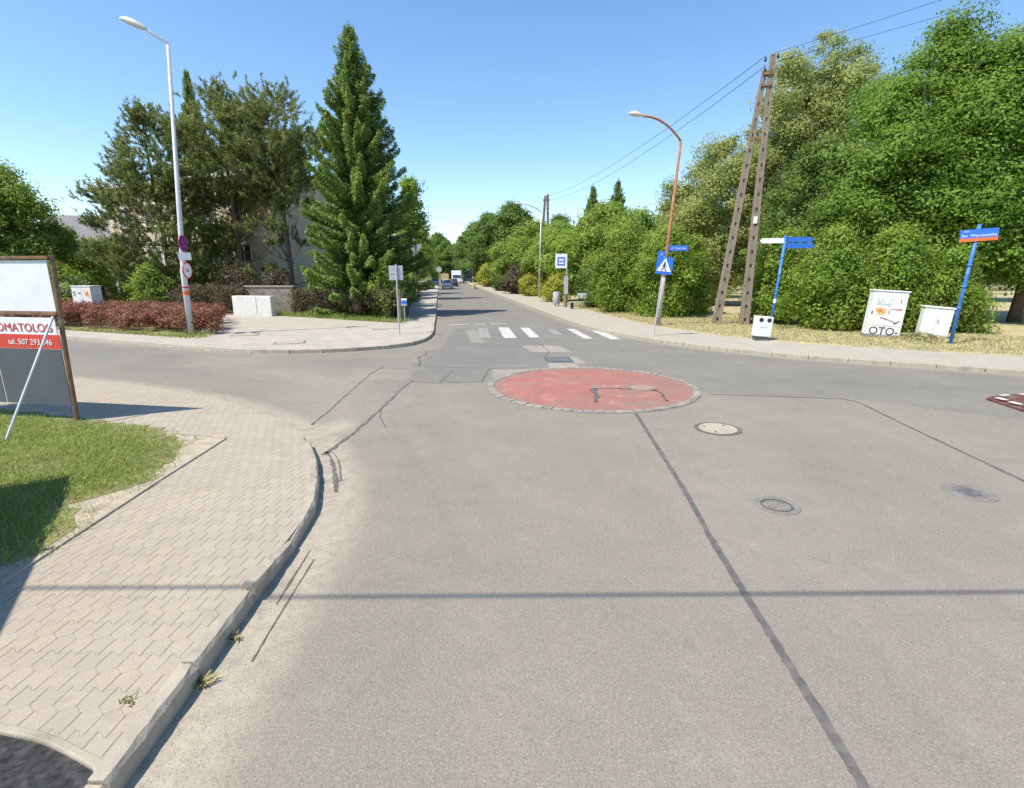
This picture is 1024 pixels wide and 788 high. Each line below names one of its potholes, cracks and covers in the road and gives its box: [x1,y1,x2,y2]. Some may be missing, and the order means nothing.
manhole cover [753,496,801,515]
manhole cover [940,483,1001,502]
crack [311,350,465,492]
crack [251,551,314,661]
manhole cover [694,422,742,436]
